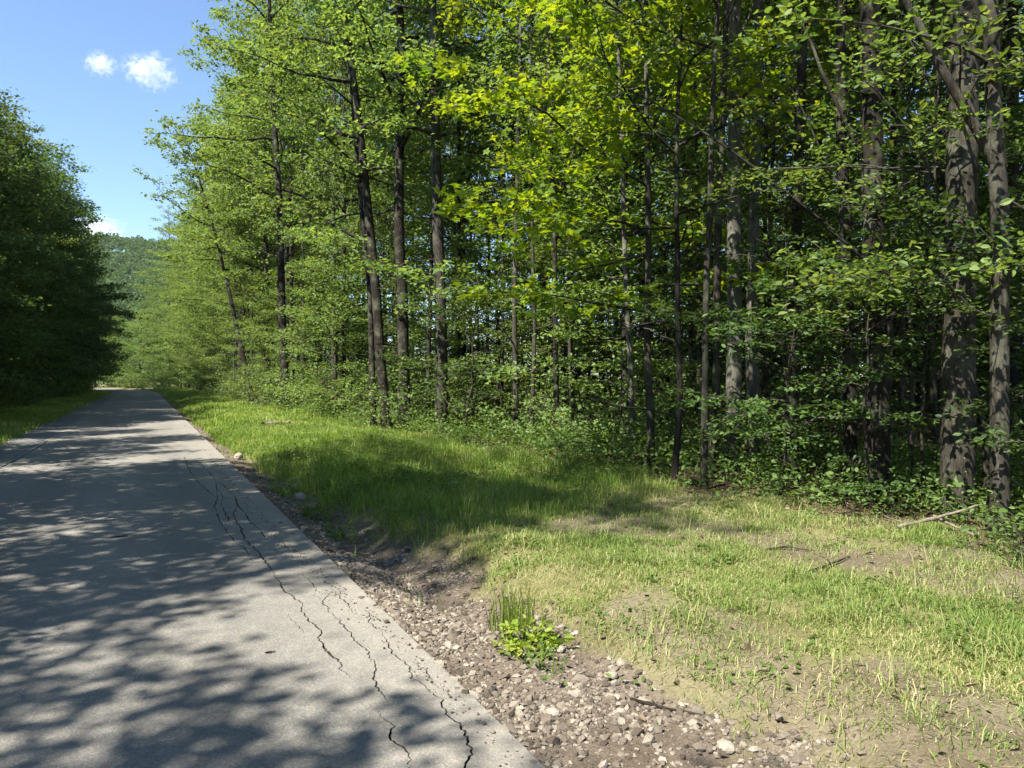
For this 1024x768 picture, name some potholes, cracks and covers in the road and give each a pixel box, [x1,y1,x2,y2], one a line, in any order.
crack [184,457,474,768]
